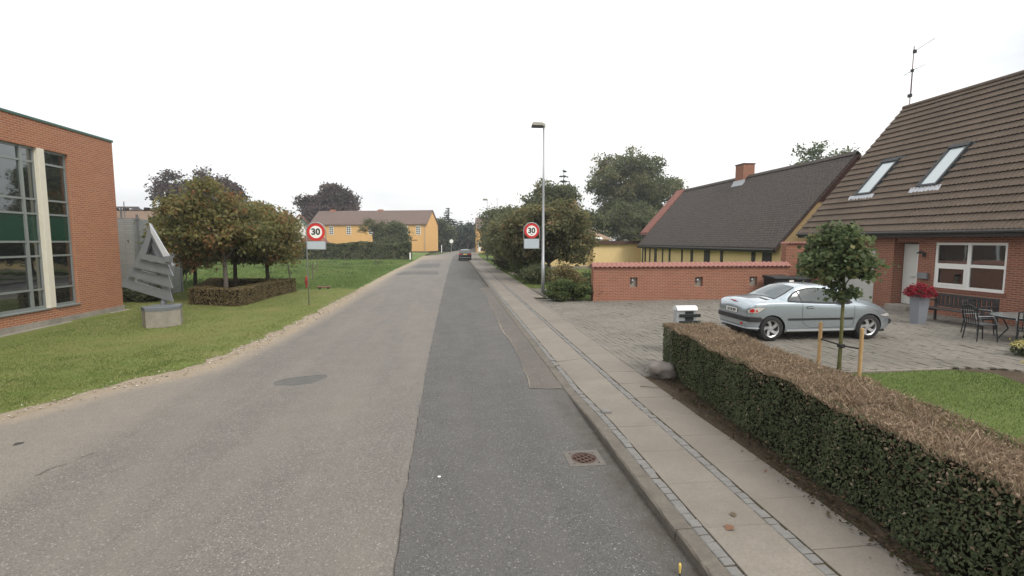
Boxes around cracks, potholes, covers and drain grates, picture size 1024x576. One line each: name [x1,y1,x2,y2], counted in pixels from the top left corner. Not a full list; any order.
drain grate [562,450,607,467]
